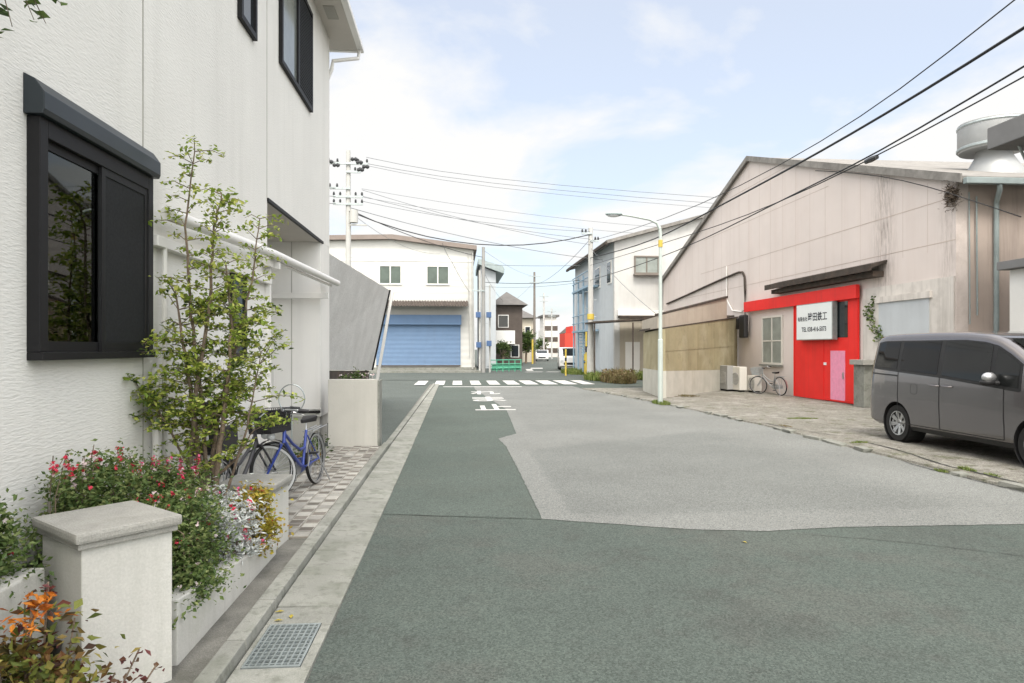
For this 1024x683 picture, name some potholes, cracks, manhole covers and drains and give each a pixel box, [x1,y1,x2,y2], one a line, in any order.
drain grate [241,623,321,669]
